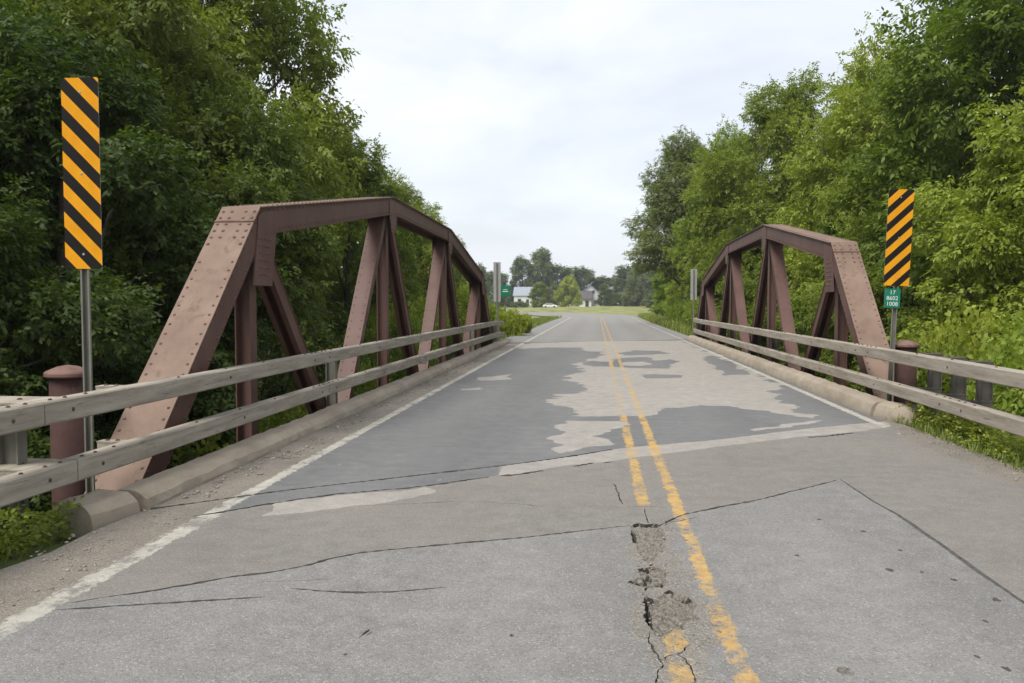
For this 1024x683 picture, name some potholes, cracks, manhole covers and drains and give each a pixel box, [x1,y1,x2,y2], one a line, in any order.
pothole [630,523,667,563]
crack [58,579,445,610]
pothole [642,590,702,637]
pothole [628,566,668,589]
crack [614,484,697,525]
